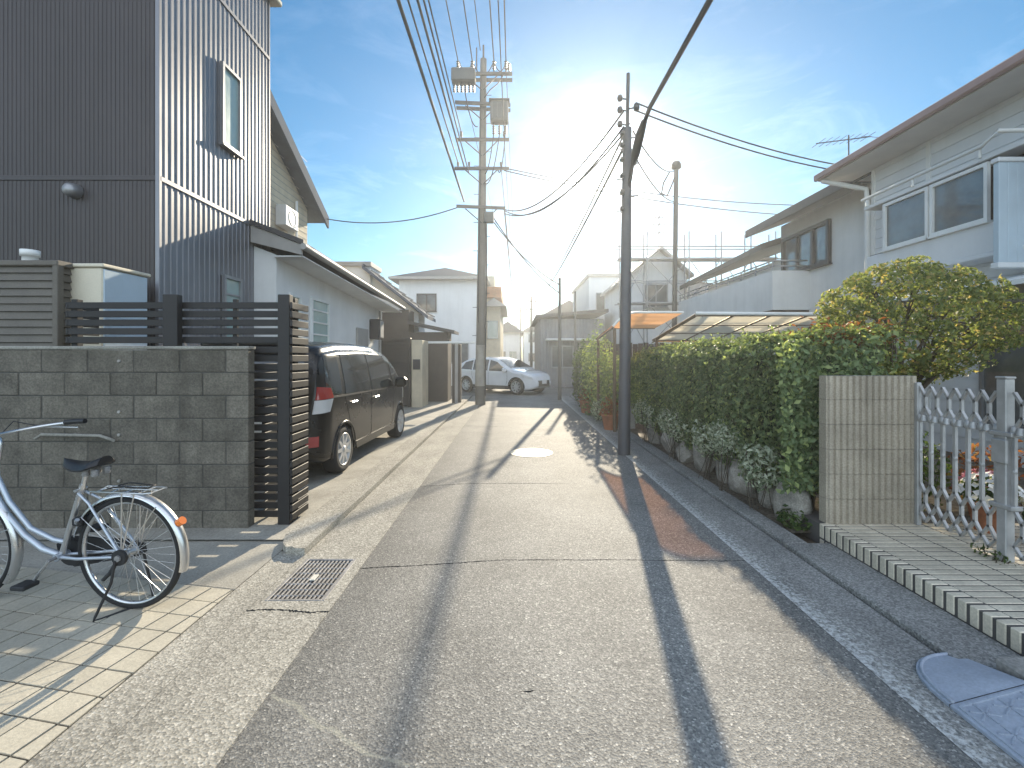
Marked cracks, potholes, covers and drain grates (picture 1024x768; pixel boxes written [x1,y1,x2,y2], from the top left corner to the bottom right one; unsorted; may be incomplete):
drain grate [264,559,356,601]
manhole cover [510,448,553,457]
